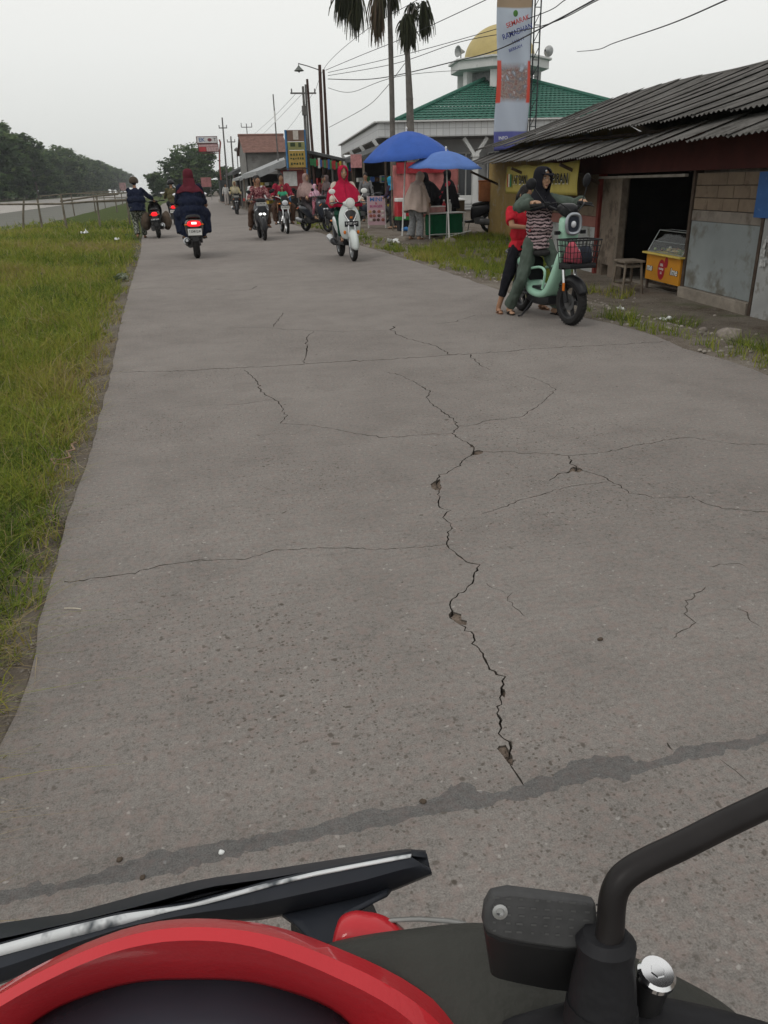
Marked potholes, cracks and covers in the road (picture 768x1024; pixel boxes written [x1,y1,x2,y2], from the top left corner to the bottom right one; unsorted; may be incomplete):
crack [126,313,662,373]
crack [66,371,768,785]
